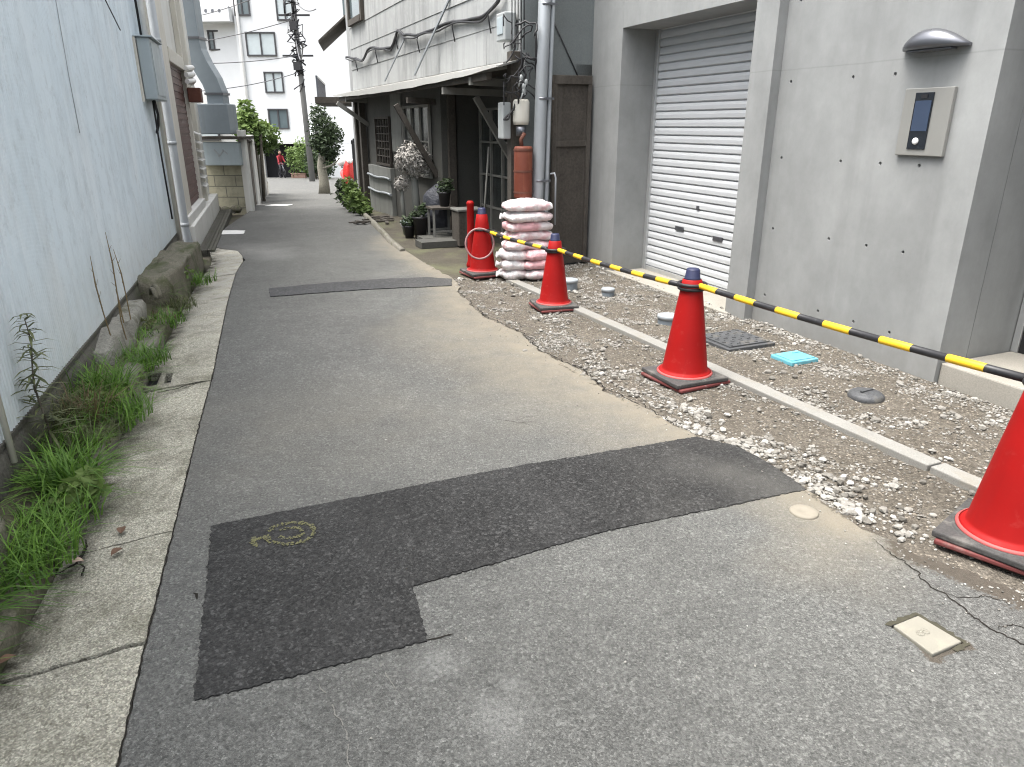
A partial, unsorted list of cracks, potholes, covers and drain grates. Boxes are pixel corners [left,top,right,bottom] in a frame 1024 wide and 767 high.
crack [881,545,1024,645]
utility cover [885,612,970,657]
crack [315,676,350,767]
manhole cover [706,329,775,352]
